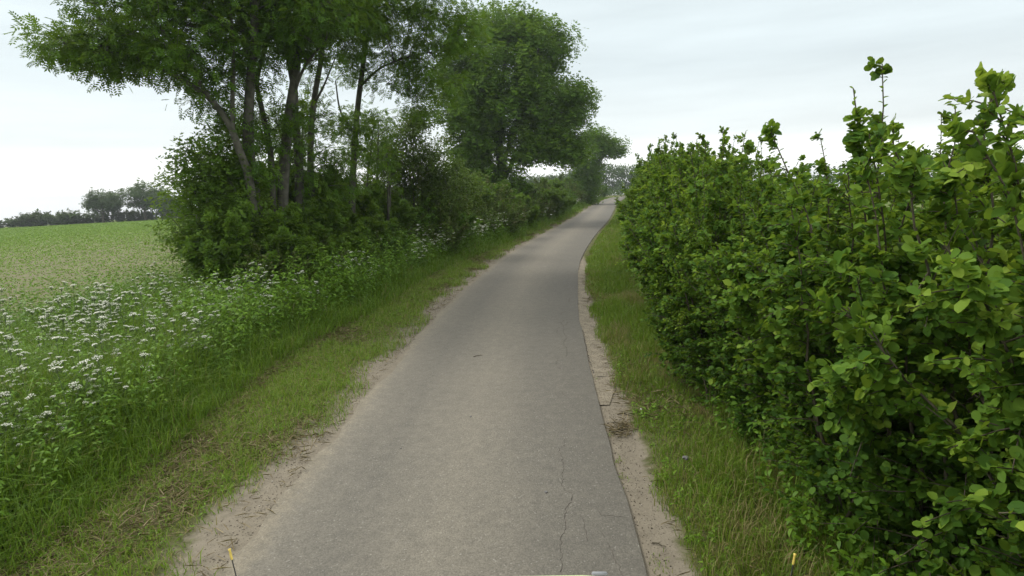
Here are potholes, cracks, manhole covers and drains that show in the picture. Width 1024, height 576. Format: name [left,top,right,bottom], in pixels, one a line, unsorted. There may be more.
crack [558,439,623,576]
